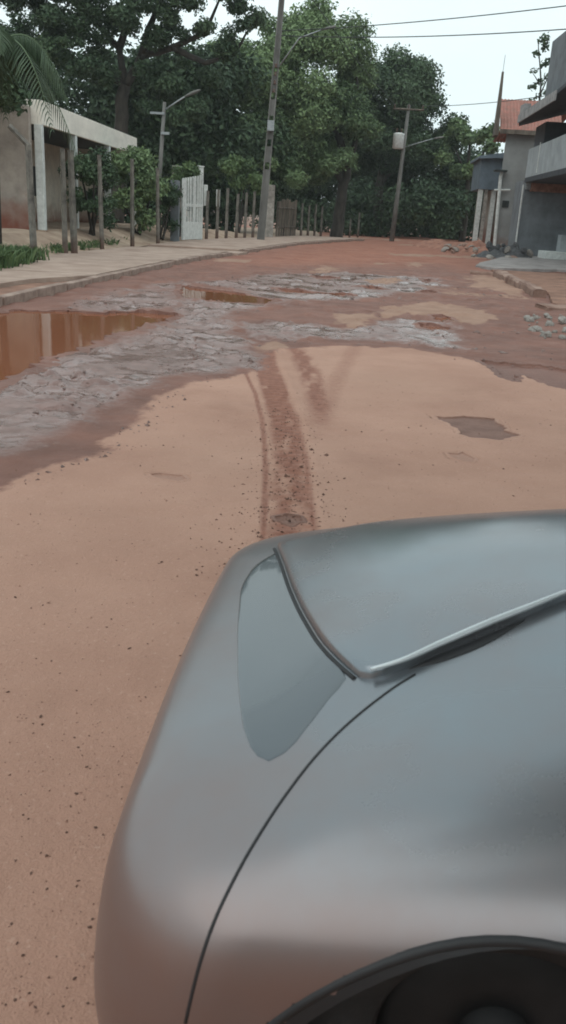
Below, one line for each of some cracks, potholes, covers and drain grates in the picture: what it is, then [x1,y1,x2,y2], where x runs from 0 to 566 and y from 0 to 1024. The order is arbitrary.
pothole [270,513,308,527]
pothole [146,472,191,483]
pothole [430,415,525,441]
pothole [173,284,282,305]
pothole [0,307,189,394]
